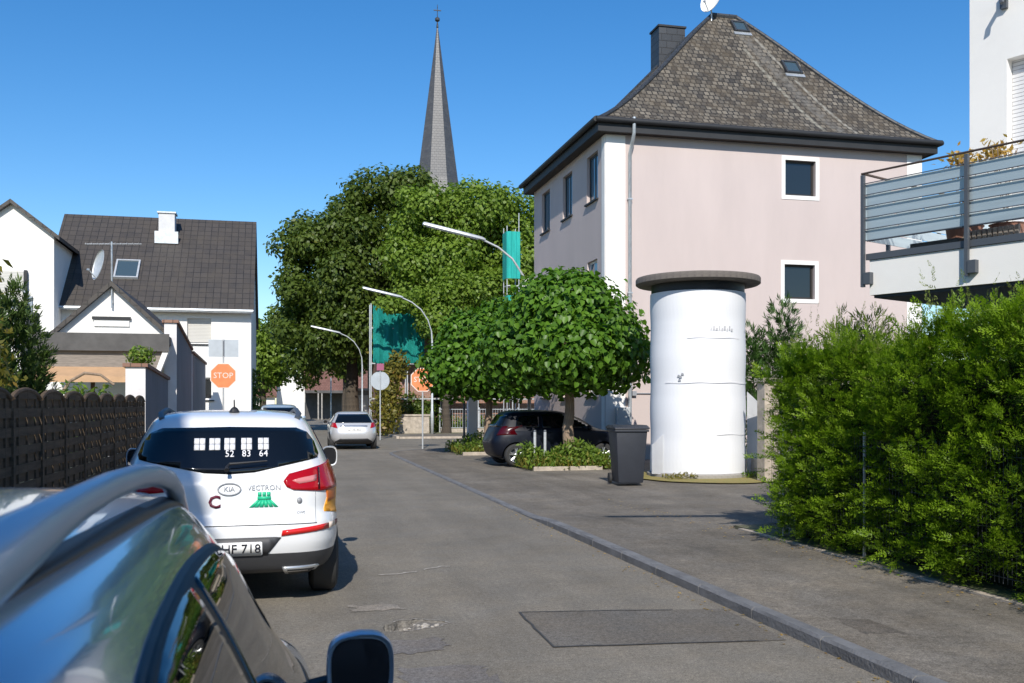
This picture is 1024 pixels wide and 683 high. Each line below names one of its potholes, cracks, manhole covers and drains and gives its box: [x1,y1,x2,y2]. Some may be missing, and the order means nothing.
pothole [383,618,451,632]
